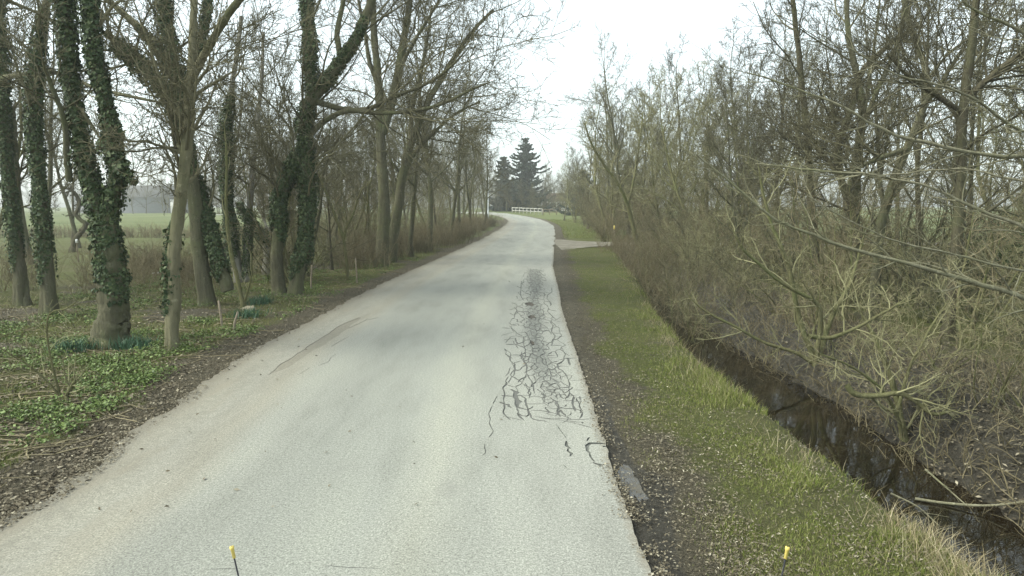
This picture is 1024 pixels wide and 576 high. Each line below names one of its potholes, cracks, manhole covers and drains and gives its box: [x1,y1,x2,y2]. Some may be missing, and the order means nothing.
crack [483,268,606,468]
